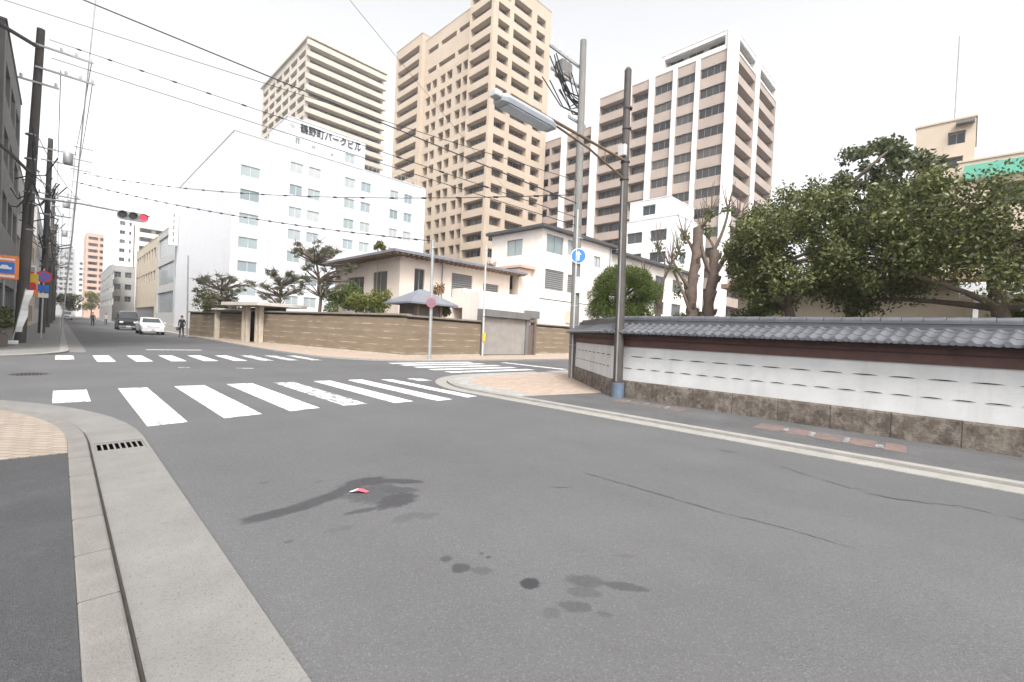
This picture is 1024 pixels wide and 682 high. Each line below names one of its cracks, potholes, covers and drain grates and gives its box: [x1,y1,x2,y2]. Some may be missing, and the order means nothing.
drain grate [94,439,146,452]
crack [781,466,1023,520]
crack [586,473,846,546]
